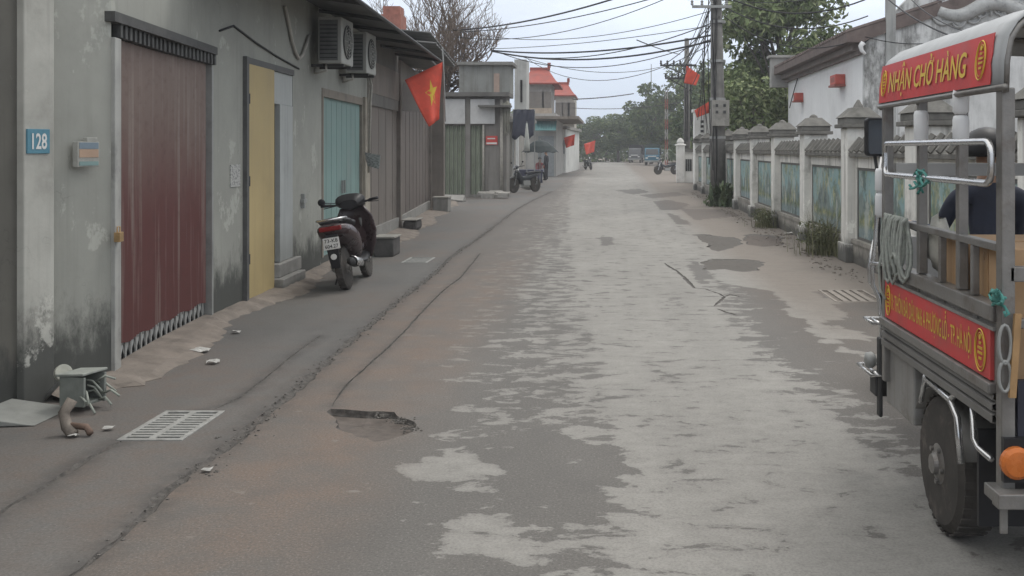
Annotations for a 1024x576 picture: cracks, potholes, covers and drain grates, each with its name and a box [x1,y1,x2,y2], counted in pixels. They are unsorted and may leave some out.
pothole [327,409,416,442]
drain grate [116,410,225,441]
crack [664,263,740,315]
drain grate [818,290,877,302]
